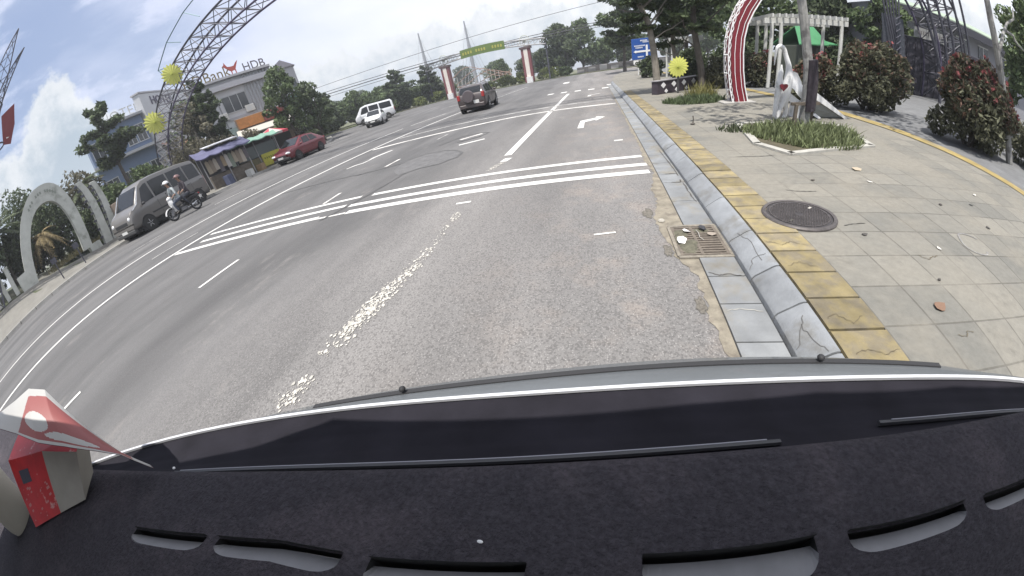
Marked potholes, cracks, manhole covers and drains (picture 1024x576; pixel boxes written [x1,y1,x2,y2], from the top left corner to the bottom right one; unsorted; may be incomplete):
drain grate [667,224,735,259]
manhole cover [761,200,838,232]
